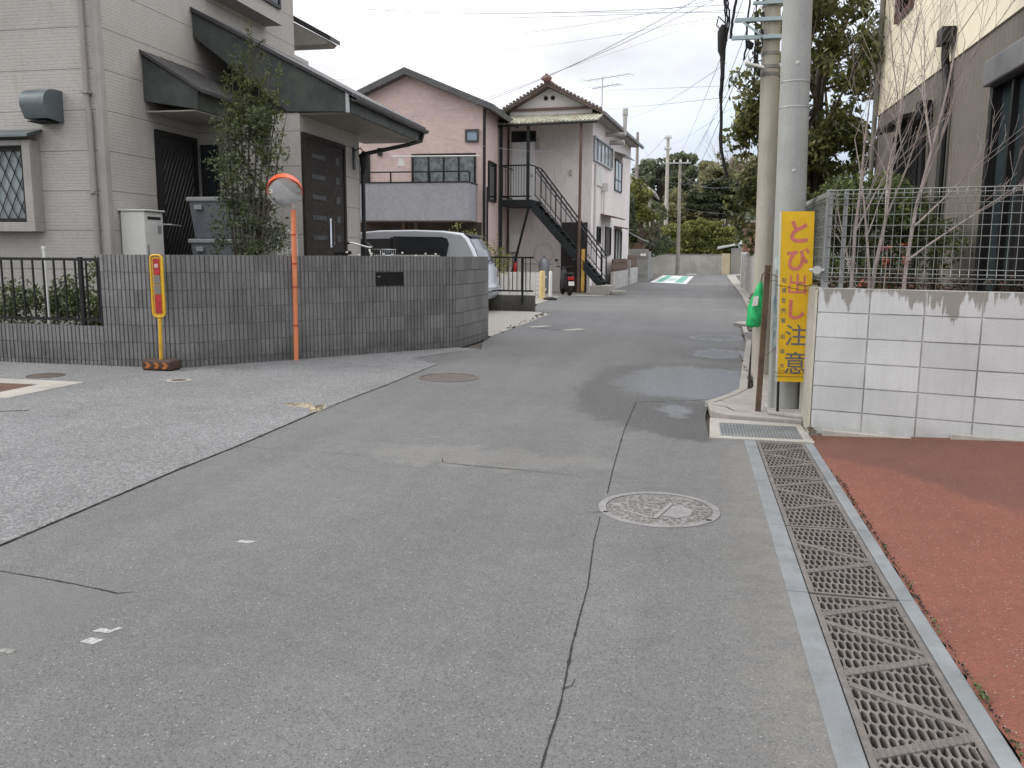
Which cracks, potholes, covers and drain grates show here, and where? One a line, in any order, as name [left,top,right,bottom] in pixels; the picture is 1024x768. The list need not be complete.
drain grate [769,476,856,531]
manhole cover [419,373,479,382]
drain grate [756,441,825,479]
drain grate [786,526,897,601]
crack [540,399,748,768]
manhole cover [599,492,720,528]
